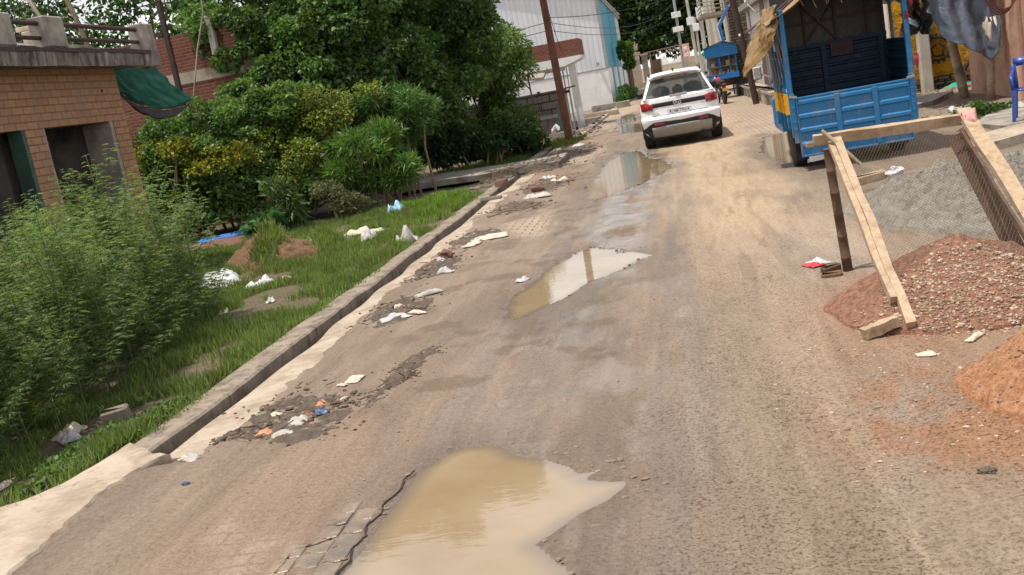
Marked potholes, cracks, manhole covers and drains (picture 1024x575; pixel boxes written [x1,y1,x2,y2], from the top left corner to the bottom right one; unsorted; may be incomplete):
crack [274,470,416,575]
pothole [493,245,659,324]
pothole [337,439,669,575]
pothole [580,150,678,201]
